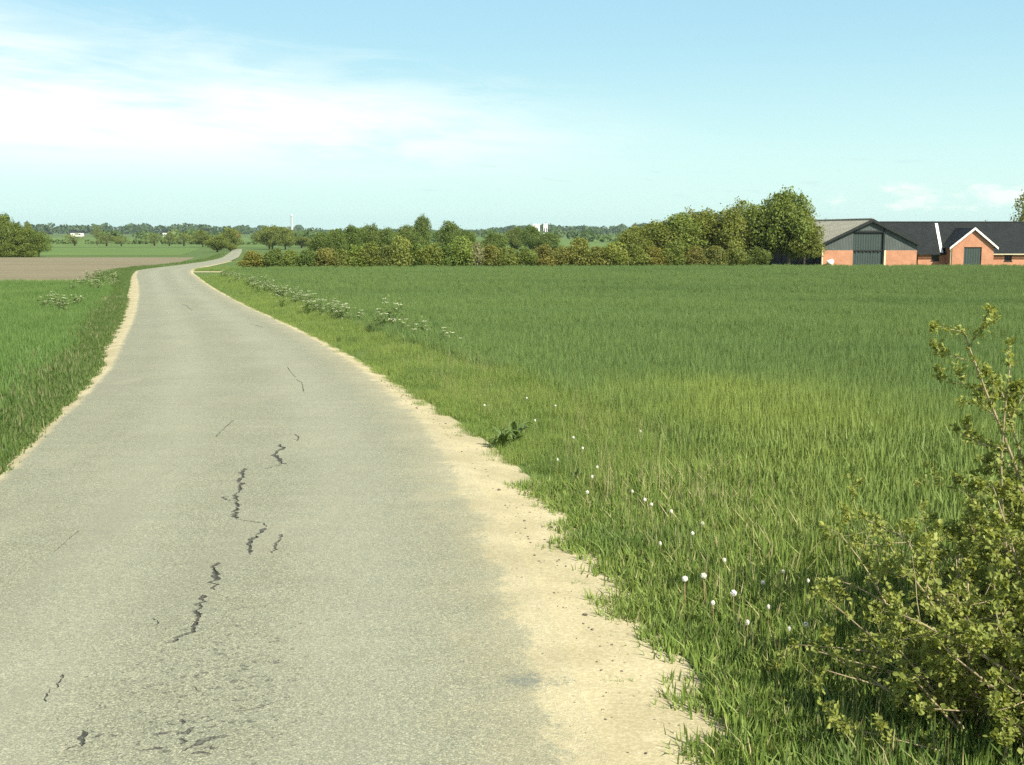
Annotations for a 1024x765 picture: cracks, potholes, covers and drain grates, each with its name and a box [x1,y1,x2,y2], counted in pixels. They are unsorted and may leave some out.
crack [221,468,283,555]
crack [66,727,104,750]
crack [267,434,299,469]
crack [152,562,221,643]
